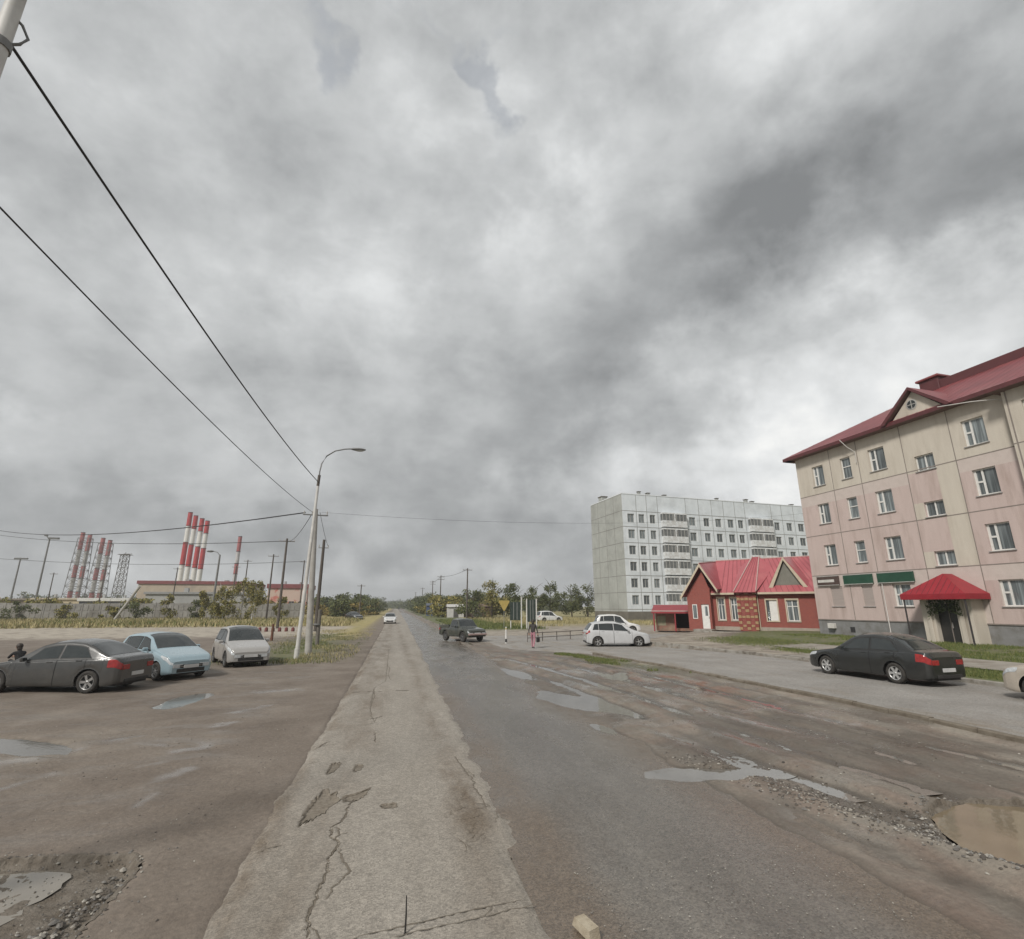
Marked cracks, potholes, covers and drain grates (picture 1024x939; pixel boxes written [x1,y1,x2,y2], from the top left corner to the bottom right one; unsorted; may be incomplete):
pothole [898,794,1024,875]
crack [354,899,546,939]
crack [303,799,354,939]
